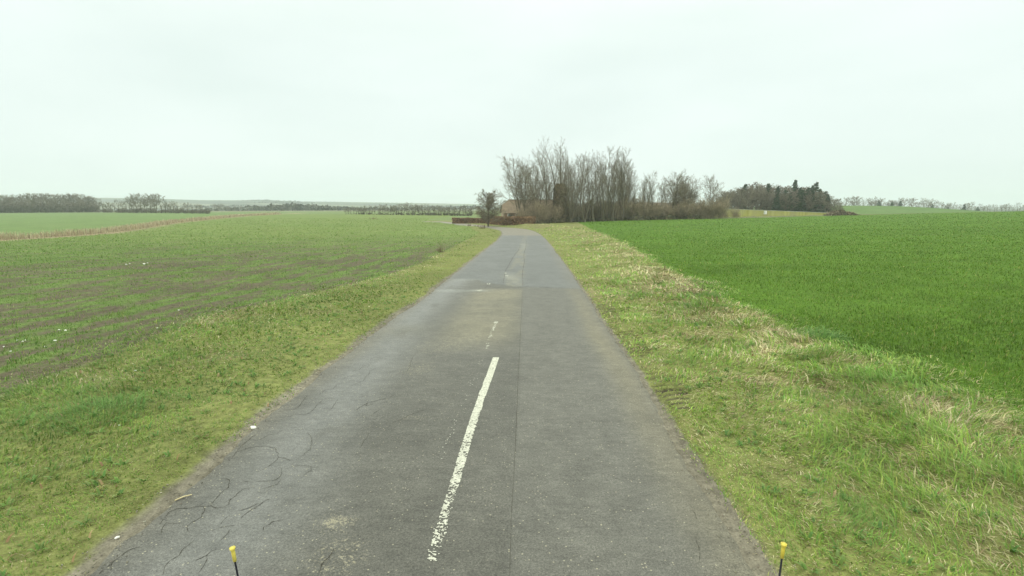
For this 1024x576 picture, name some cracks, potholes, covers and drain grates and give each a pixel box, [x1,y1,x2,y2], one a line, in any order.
crack [160,367,385,573]
